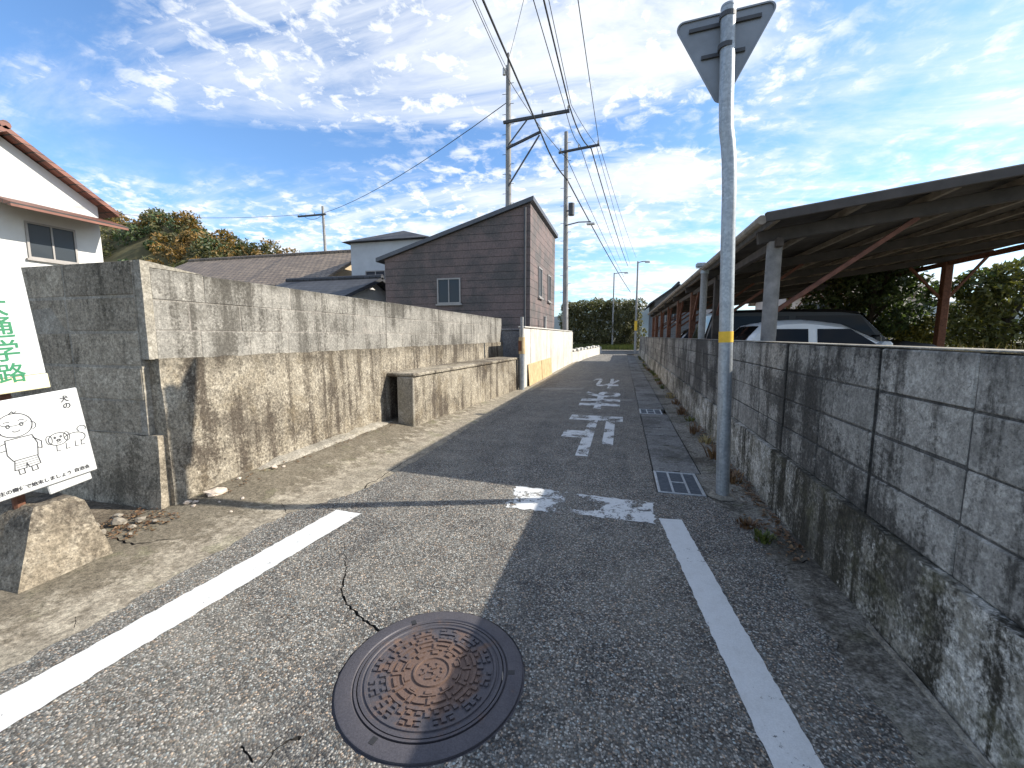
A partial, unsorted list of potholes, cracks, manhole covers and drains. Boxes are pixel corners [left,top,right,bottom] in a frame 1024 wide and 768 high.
crack [239,736,302,768]
crack [340,544,380,632]
drain grate [653,470,707,497]
manhole cover [331,611,525,768]
